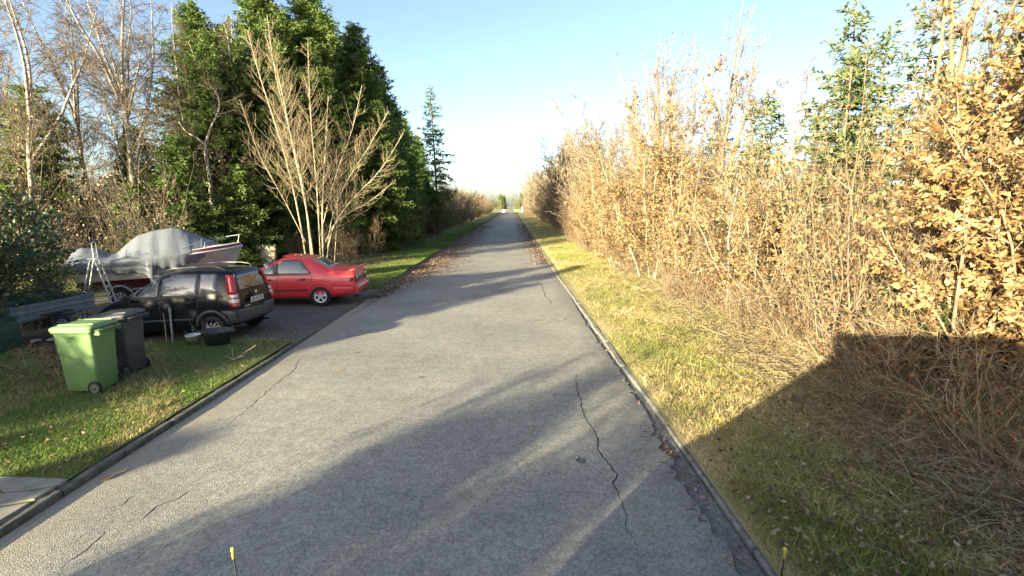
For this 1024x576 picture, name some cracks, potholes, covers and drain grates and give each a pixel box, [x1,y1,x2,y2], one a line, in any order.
crack [48,531,105,576]
crack [575,381,640,556]
crack [121,490,190,518]
